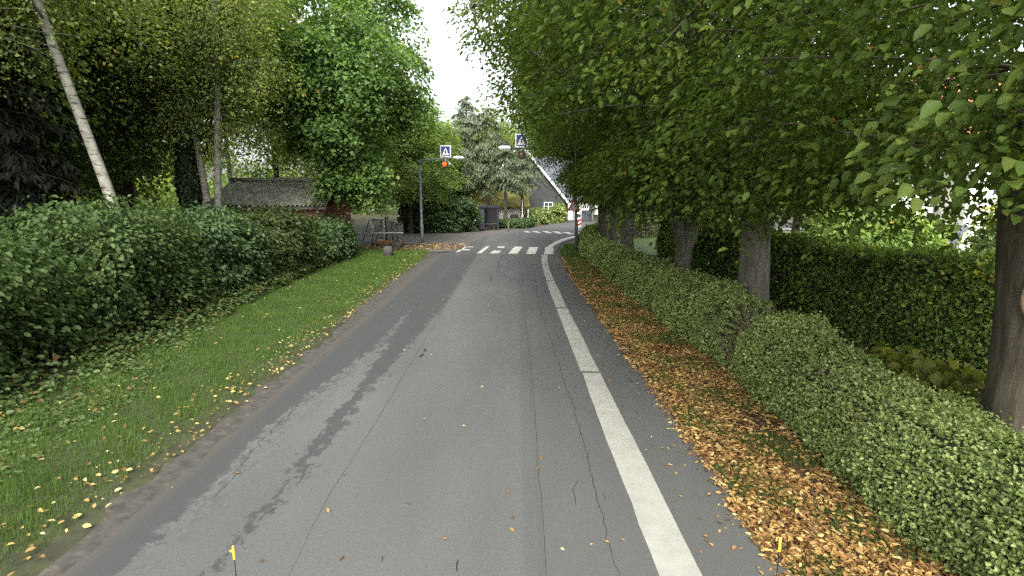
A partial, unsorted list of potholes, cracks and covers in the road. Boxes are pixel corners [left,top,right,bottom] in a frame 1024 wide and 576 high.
crack [523,266,620,575]
